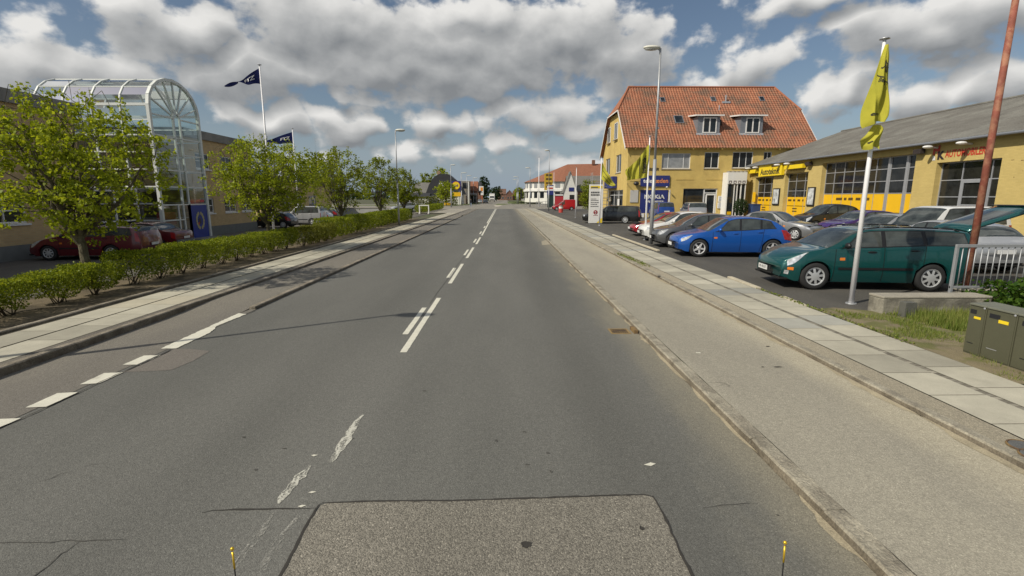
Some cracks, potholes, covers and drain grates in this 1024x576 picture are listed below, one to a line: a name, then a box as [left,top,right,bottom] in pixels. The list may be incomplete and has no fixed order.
manhole cover [1005,439,1024,450]
crack [0,539,118,576]
drain grate [608,326,638,334]
